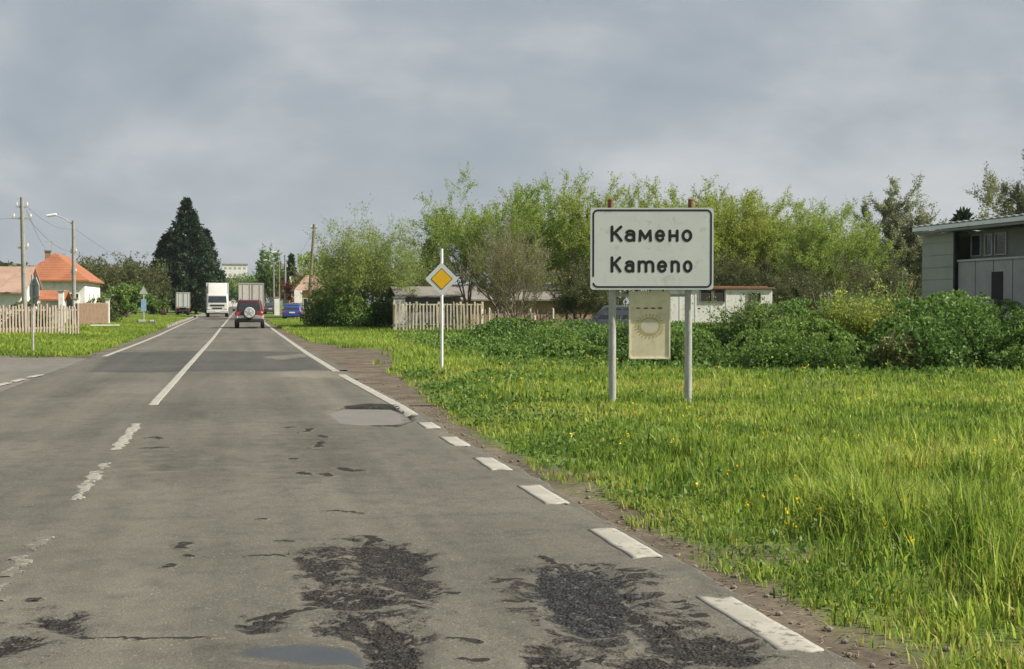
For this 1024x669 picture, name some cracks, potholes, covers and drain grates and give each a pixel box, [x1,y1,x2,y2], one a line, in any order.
pothole [285,582,404,613]
pothole [220,606,304,639]
pothole [6,609,97,638]
pothole [516,564,645,640]
pothole [591,648,696,669]
pothole [333,540,445,603]
pothole [0,630,66,660]
pothole [500,638,595,669]
crack [71,607,336,642]
